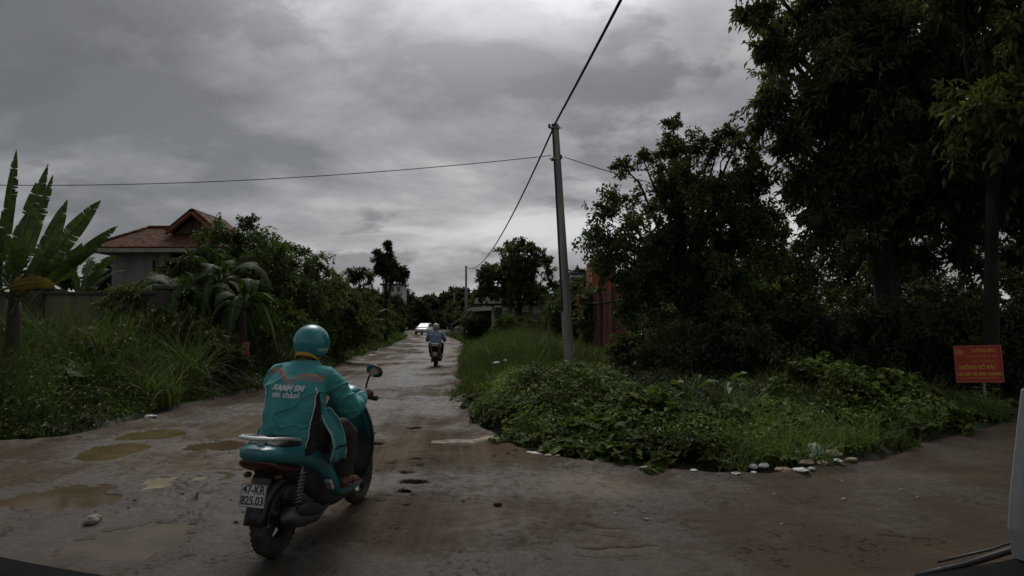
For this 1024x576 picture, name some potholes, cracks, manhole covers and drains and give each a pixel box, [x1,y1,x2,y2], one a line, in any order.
pothole [374,484,430,501]
pothole [381,468,431,478]
pothole [97,427,203,443]
pothole [104,472,227,494]
pothole [0,480,147,520]
pothole [54,440,167,466]
pothole [165,437,251,455]
pothole [382,476,449,490]
crack [571,519,660,557]
